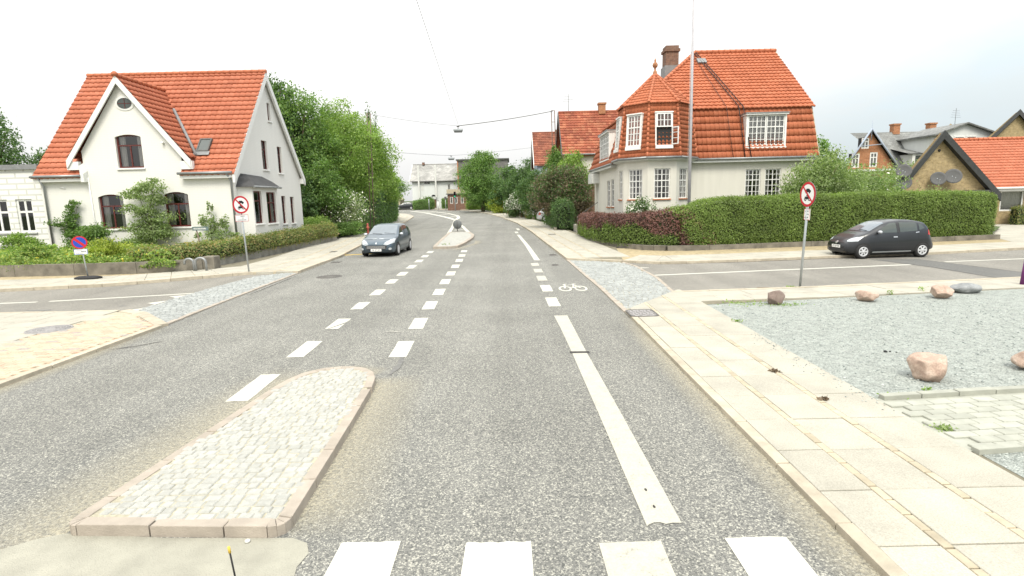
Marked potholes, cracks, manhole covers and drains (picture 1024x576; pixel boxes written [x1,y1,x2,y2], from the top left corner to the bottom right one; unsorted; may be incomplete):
manhole cover [24,325,74,334]
manhole cover [625,309,659,317]
